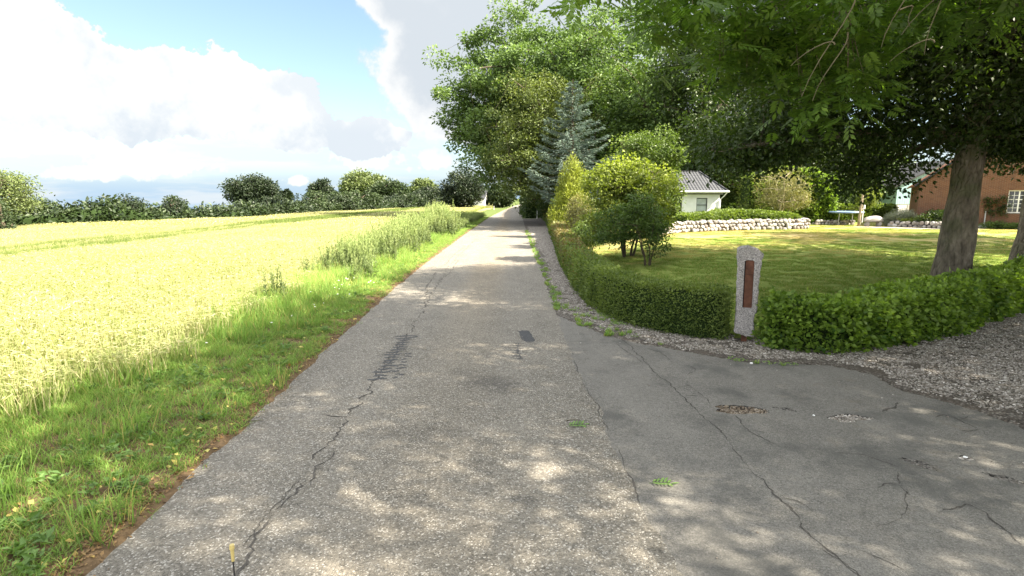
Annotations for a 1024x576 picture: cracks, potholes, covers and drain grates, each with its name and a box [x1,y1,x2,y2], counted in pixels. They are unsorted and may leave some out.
crack [943,503,1018,542]
pothole [715,405,769,414]
pothole [827,414,874,422]
crack [235,242,473,576]
crack [572,353,640,503]
crack [616,339,902,576]
